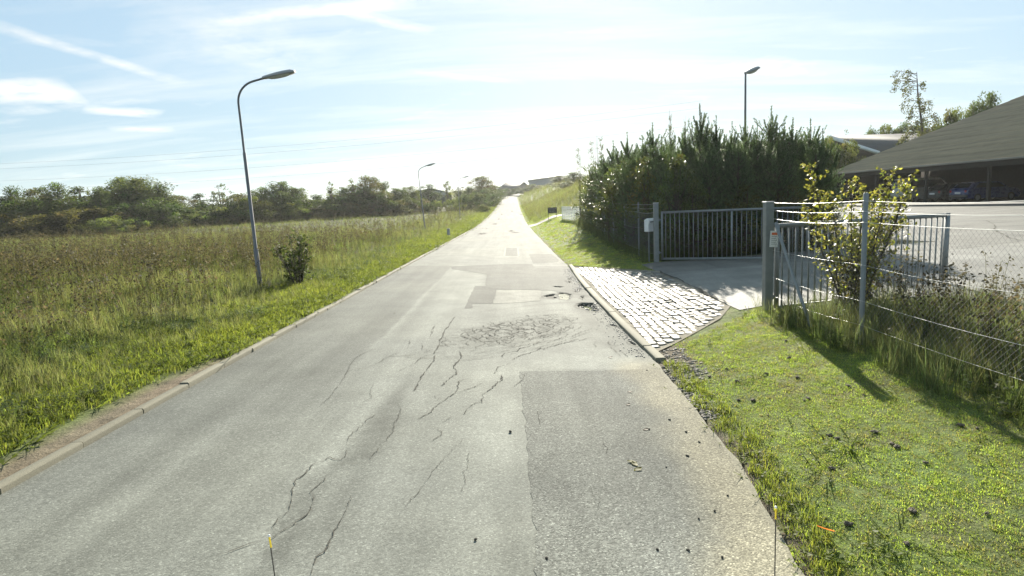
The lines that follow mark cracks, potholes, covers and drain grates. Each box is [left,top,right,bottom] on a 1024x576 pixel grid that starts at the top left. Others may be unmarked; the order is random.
crack [311,496,352,573]
crack [225,314,592,553]
pothole [573,302,601,312]
pothole [554,292,574,301]
